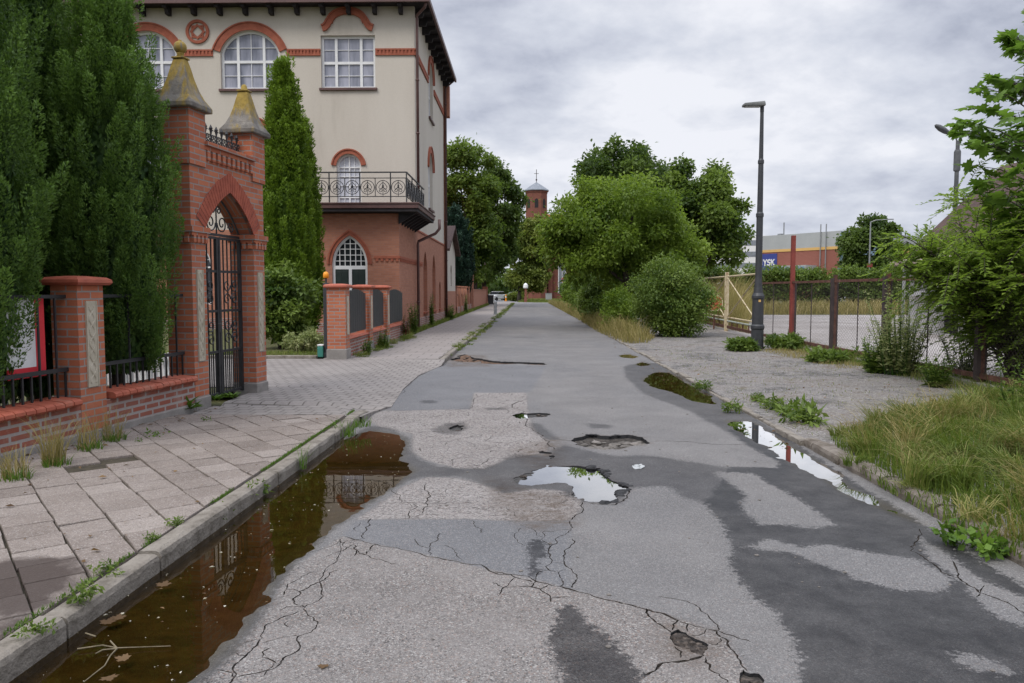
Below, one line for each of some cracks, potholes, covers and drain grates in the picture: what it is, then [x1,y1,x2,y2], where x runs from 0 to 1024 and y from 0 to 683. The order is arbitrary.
crack [217,482,751,683]
pothole [514,465,633,505]
pothole [571,434,649,450]
crack [910,529,1024,613]
pothole [739,670,765,683]
pothole [670,629,708,655]
pothole [450,354,547,365]
